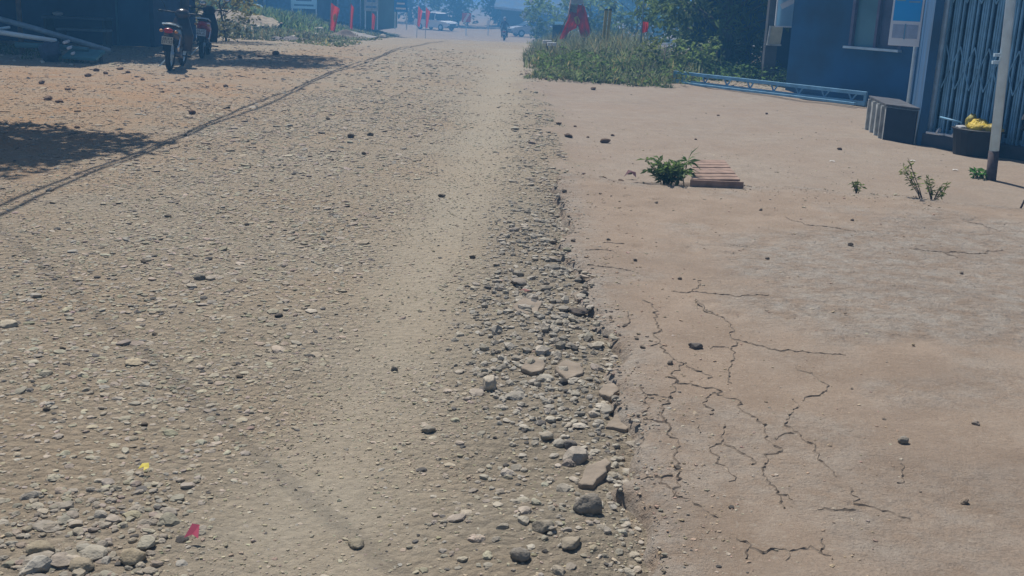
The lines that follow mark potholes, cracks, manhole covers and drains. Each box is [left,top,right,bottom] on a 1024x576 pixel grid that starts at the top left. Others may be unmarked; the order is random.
crack [622,280,910,520]
crack [786,217,856,232]
crack [910,248,1003,258]
crack [736,538,833,561]
